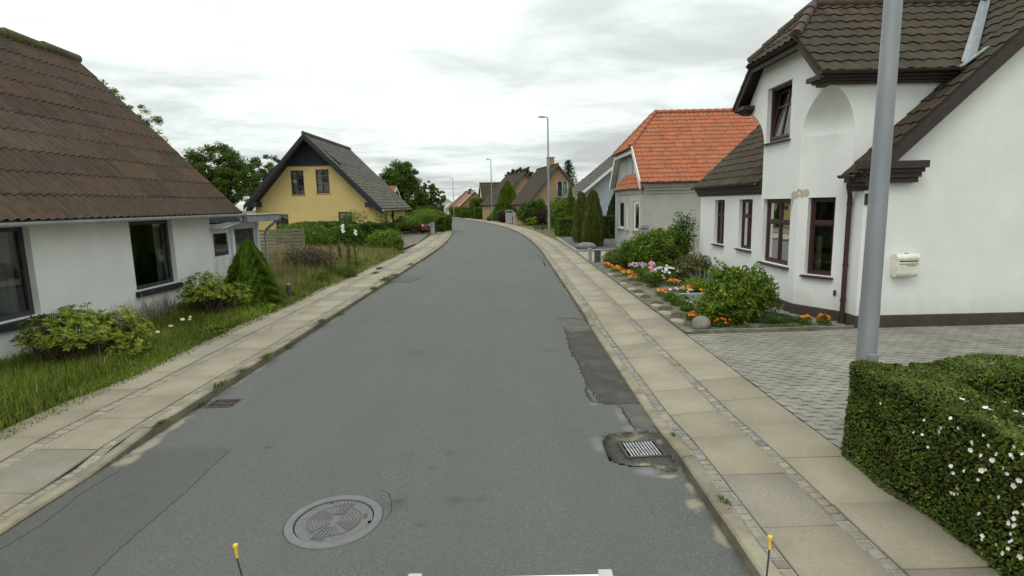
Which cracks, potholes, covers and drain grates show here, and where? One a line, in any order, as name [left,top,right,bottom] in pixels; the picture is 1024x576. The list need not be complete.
drain grate [204,399,242,408]
manhole cover [282,495,384,550]
drain grate [617,440,668,460]
crack [0,470,120,550]
pothole [602,430,679,472]
